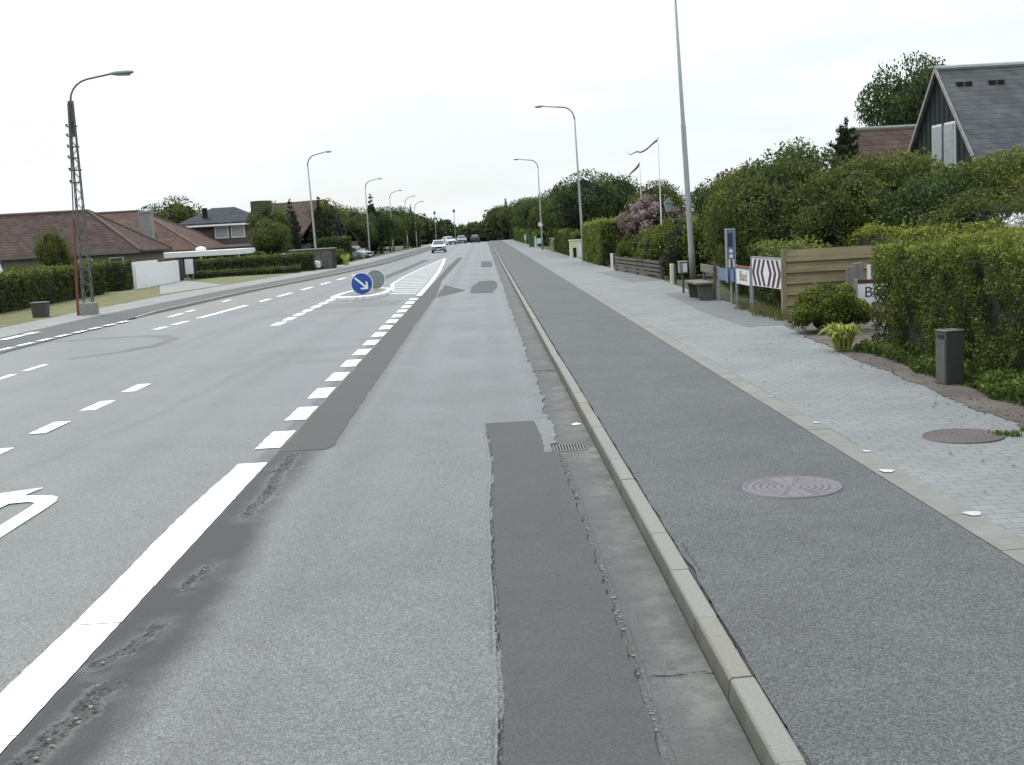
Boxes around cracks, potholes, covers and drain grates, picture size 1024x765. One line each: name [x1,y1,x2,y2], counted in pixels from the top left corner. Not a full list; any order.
manhole cover [922,429,1005,444]
drain grate [552,443,589,452]
manhole cover [742,476,843,499]
